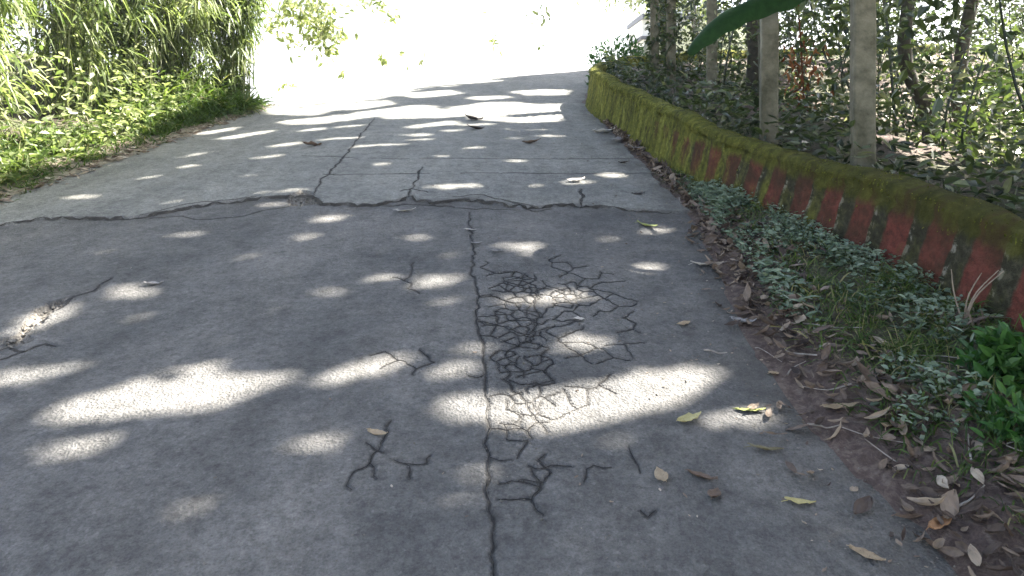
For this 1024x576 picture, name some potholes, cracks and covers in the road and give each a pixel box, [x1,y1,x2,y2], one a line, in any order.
crack [468,212,643,576]
crack [370,350,435,376]
crack [314,118,634,196]
pothole [286,190,318,206]
crack [56,278,112,310]
crack [346,420,428,490]
crack [0,343,56,360]
